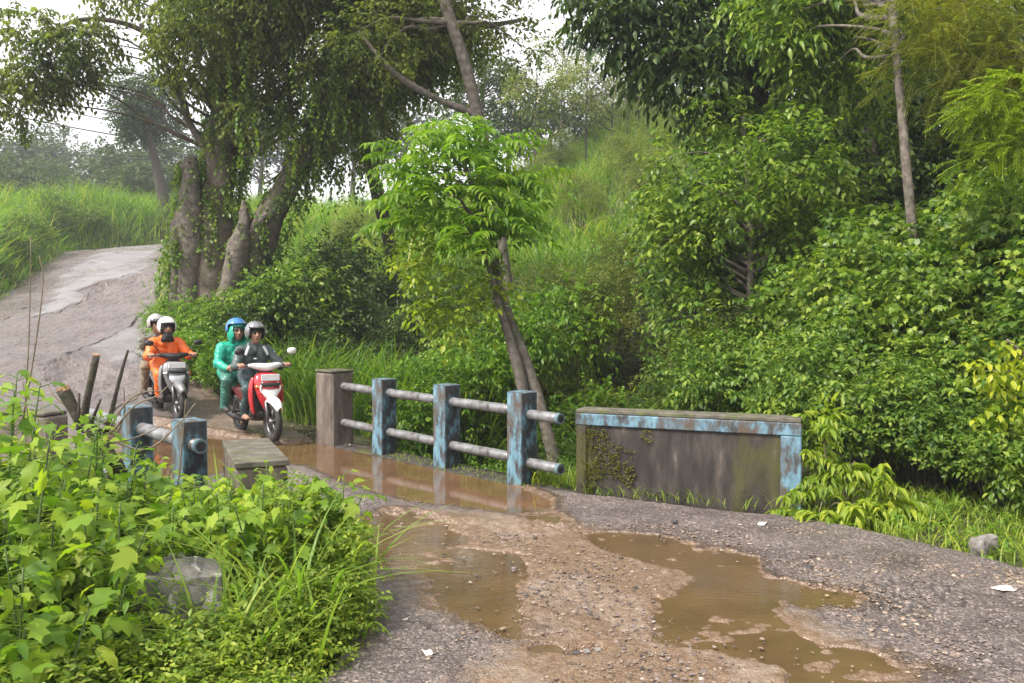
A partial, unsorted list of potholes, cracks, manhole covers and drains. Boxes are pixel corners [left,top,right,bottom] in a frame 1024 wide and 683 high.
pothole [359,506,543,640]
crack [66,312,144,355]
pothole [502,507,927,683]
crack [3,301,83,320]
pothole [98,414,556,513]
